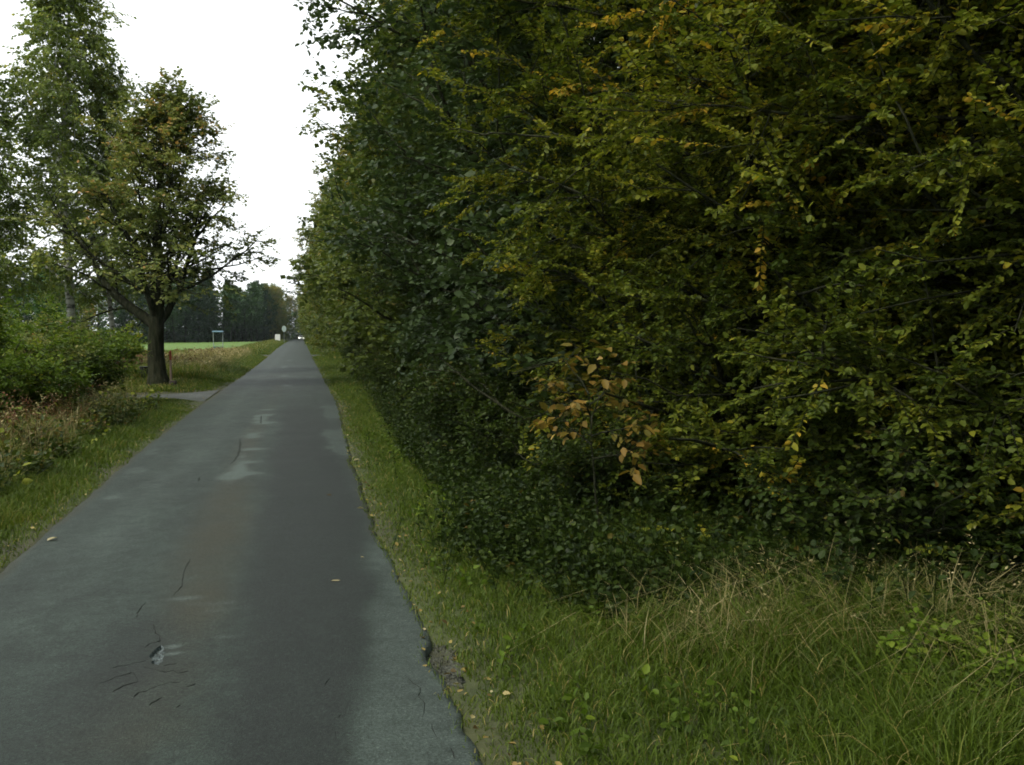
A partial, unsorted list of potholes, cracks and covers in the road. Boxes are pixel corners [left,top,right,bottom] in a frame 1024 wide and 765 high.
crack [99,602,195,707]
crack [408,678,455,759]
pothole [149,645,166,665]
